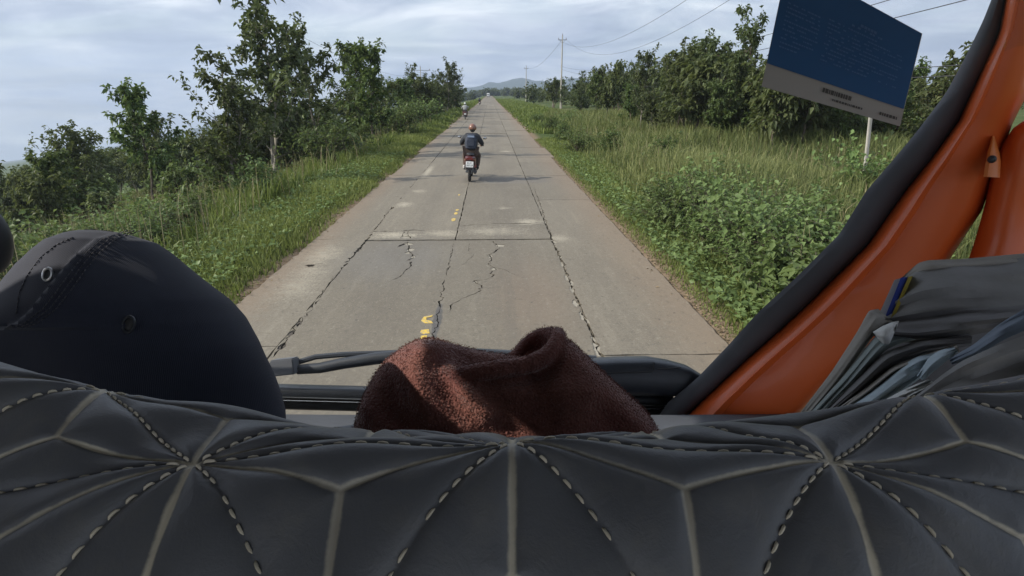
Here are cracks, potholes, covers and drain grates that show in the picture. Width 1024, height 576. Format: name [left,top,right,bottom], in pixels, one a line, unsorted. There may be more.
crack [275,208,417,354]
crack [432,191,605,357]
